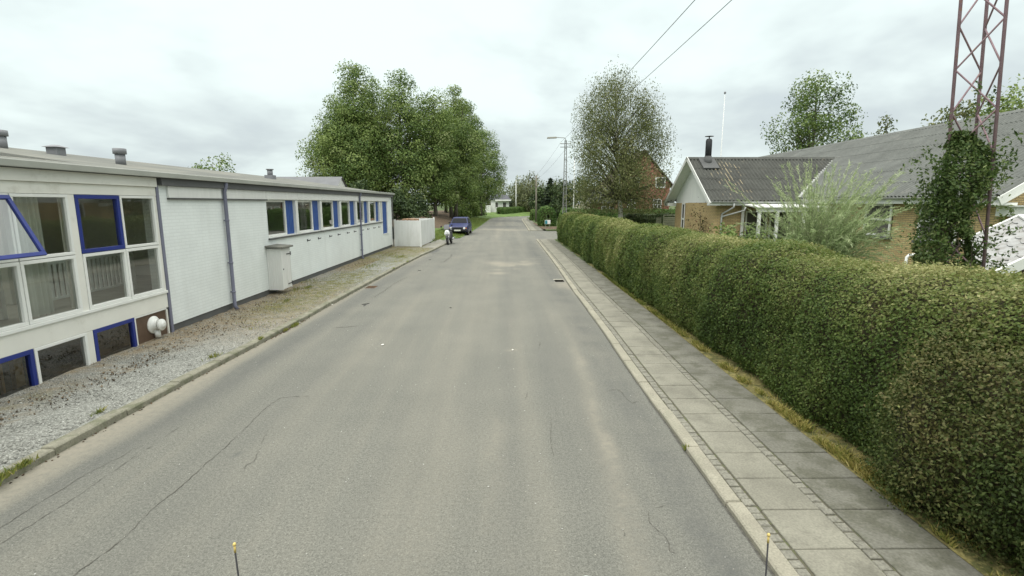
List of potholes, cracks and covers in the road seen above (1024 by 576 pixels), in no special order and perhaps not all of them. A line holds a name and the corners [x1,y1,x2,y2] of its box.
crack [73,396,298,576]
crack [0,427,179,544]
